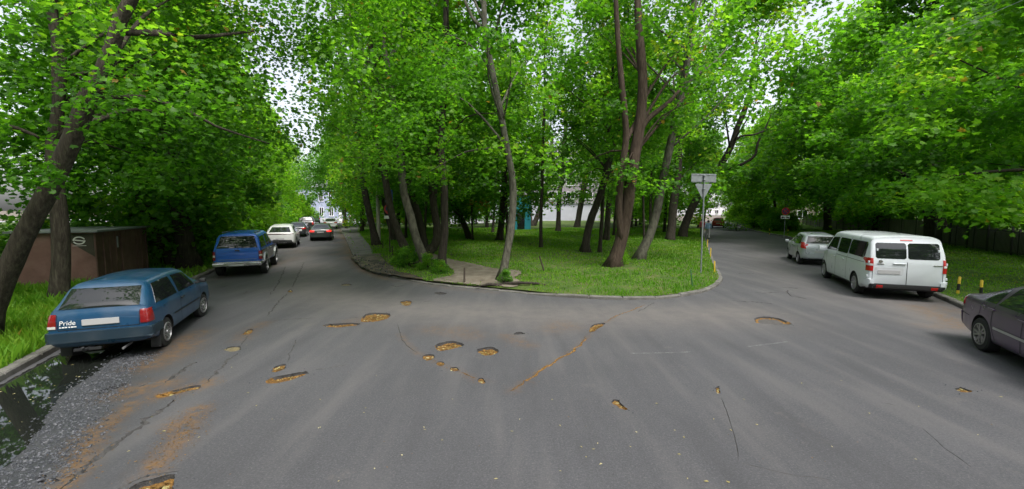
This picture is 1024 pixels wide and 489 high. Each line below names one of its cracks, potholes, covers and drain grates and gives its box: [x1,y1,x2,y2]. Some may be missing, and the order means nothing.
pothole [155,385,201,398]
pothole [477,347,499,356]
pothole [435,341,464,351]
crack [722,400,833,481]
pothole [266,371,308,384]
crack [511,337,586,391]
pothole [129,474,175,489]
pothole [755,316,792,326]
pothole [361,313,391,322]
